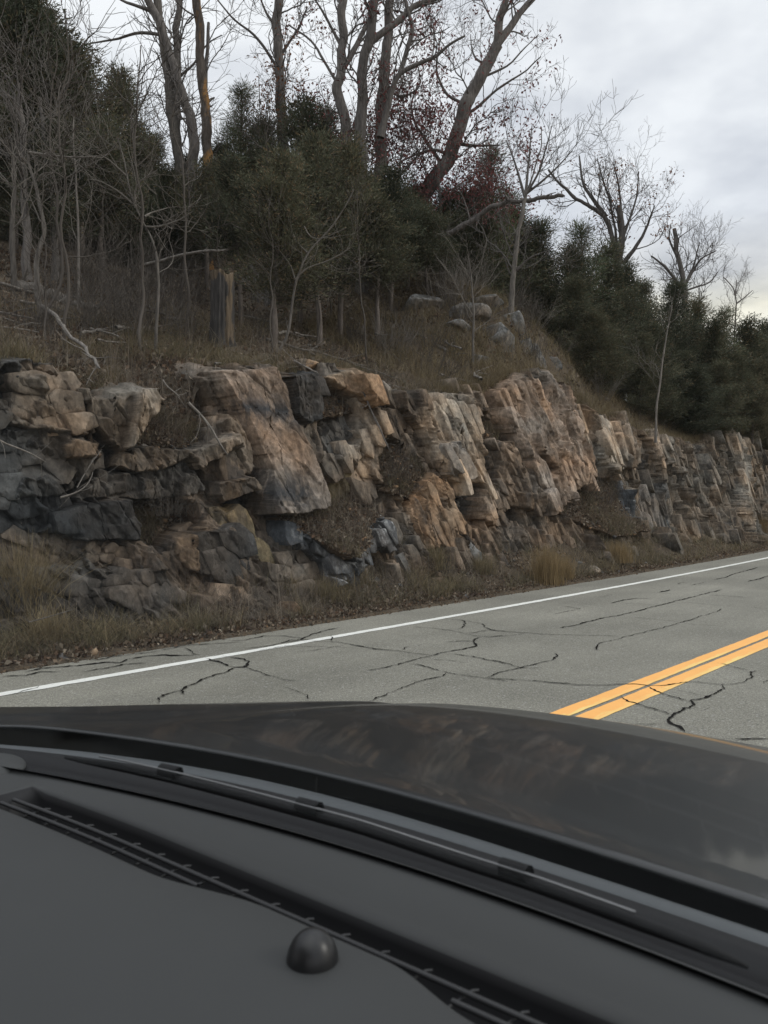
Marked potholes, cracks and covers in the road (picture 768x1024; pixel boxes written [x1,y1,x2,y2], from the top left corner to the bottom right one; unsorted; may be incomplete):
crack [0,567,768,732]
